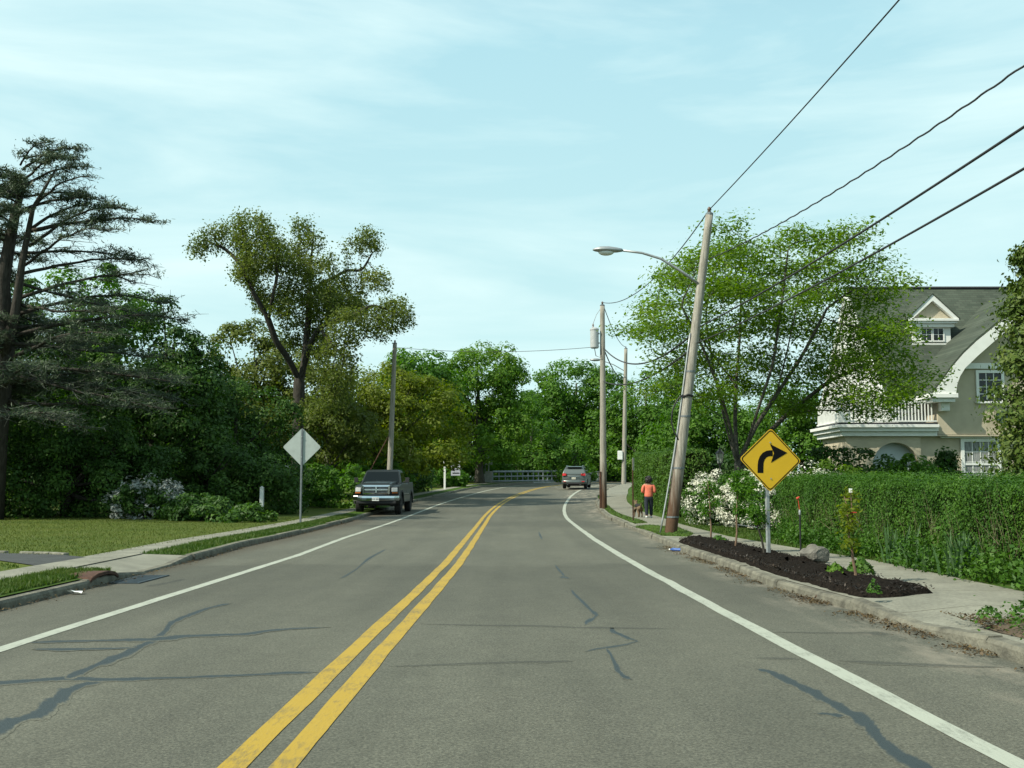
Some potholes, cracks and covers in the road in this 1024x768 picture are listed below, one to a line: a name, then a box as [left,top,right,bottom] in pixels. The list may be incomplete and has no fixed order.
drain grate [41,571,169,589]
crack [555,565,571,579]
